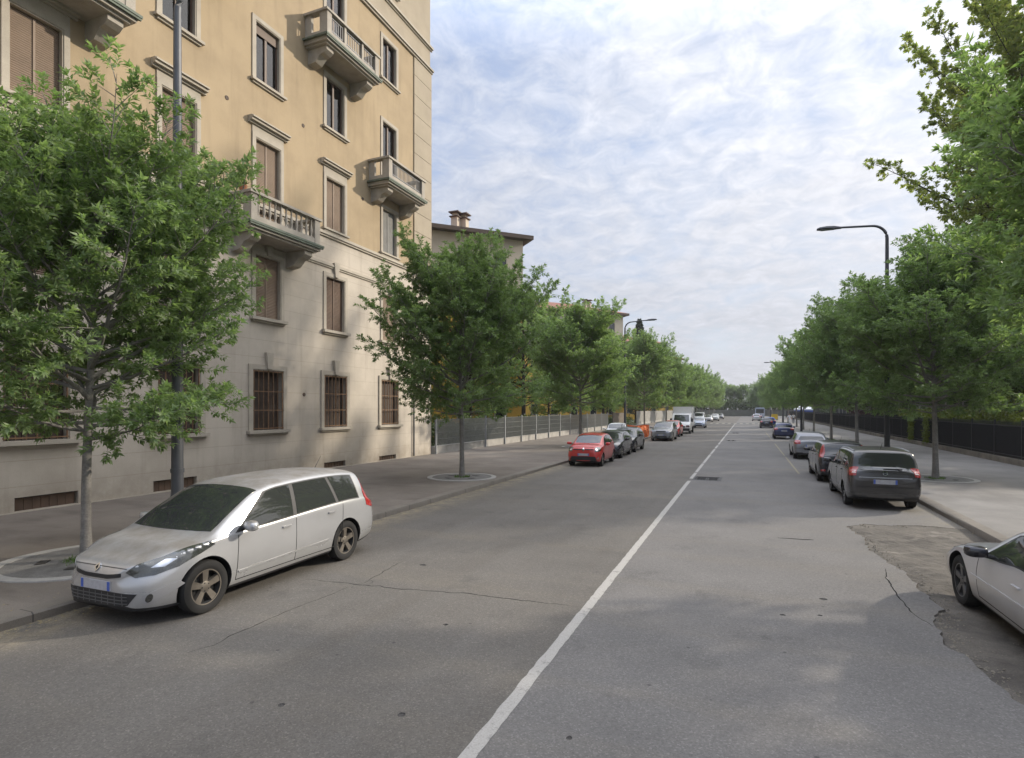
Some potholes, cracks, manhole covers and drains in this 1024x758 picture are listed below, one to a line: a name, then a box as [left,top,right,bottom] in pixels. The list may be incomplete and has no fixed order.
crack [885,569,931,625]
crack [188,563,568,653]
